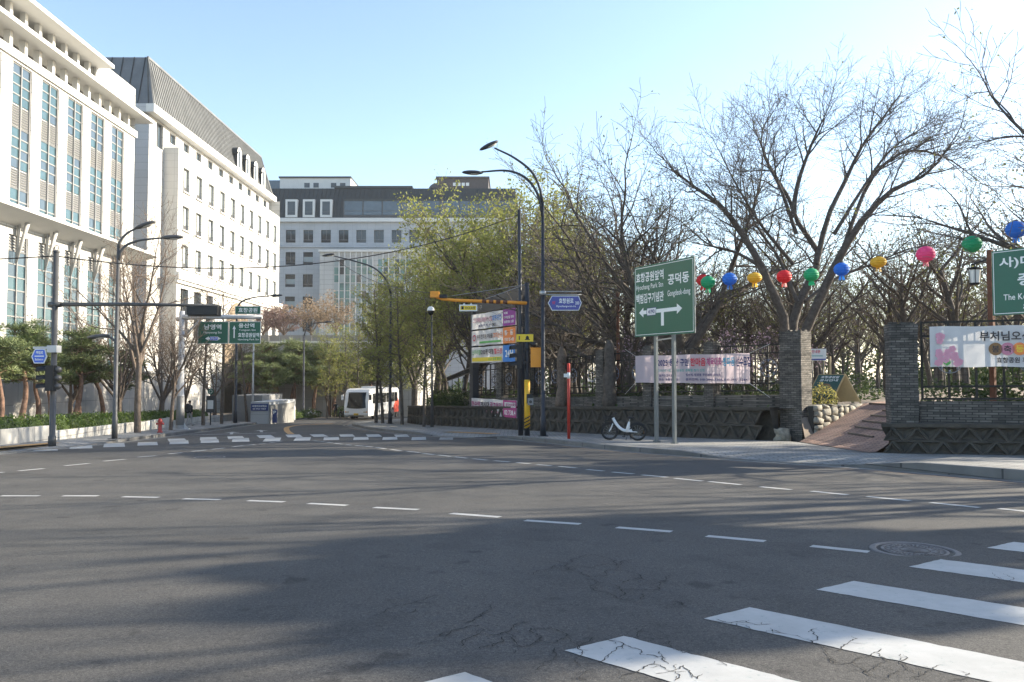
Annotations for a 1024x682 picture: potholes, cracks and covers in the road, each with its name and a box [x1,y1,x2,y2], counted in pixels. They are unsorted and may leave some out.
crack [718,619,970,681]
crack [416,605,727,680]
crack [533,554,685,607]
manhole cover [869,542,962,557]
